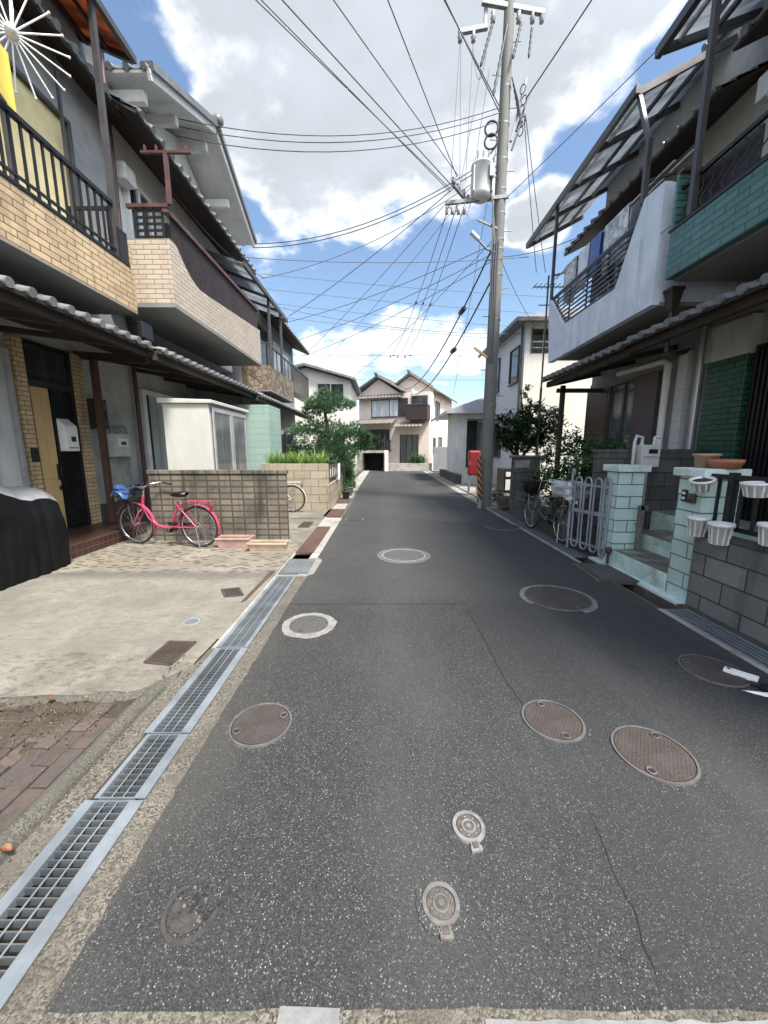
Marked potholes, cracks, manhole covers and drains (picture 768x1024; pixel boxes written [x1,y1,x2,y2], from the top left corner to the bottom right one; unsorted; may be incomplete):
manhole cover [415,874,468,941]
manhole cover [519,585,598,613]
manhole cover [452,810,485,854]
manhole cover [672,653,753,690]
manhole cover [521,700,598,753]
manhole cover [610,725,709,795]
drain grate [217,576,296,648]
manhole cover [377,548,431,564]
crack [591,815,664,996]
manhole cover [282,613,337,639]
drain grate [144,648,248,734]
